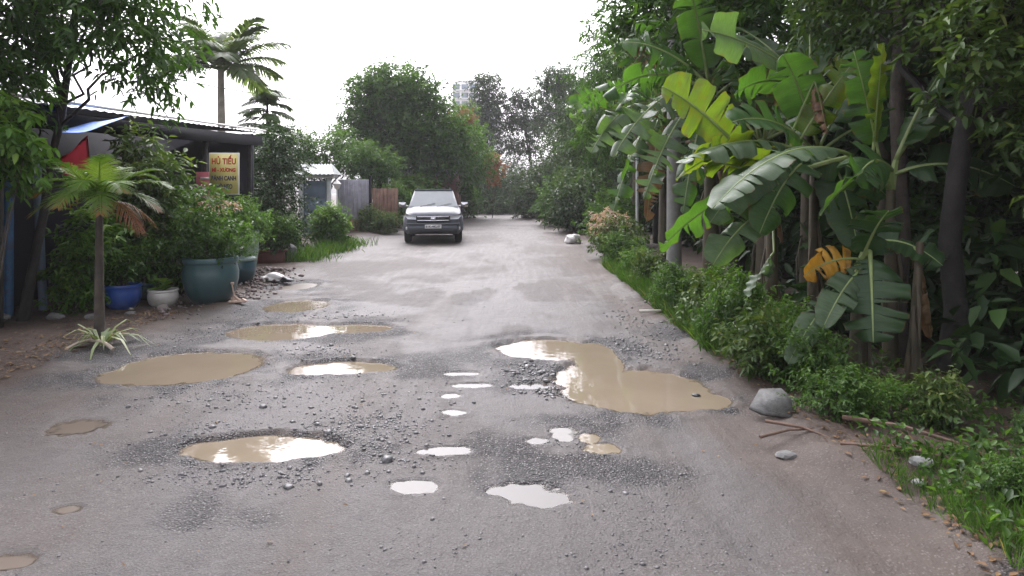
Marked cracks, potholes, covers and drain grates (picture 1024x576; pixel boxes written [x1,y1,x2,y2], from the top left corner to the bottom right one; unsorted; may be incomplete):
pothole [543,424,588,444]
pothole [430,369,490,377]
pothole [517,435,556,447]
pothole [39,502,92,516]
pothole [81,347,282,388]
pothole [0,547,57,572]
pothole [215,320,402,341]
pothole [273,281,323,290]
pothole [410,444,480,457]
pothole [163,427,358,464]
pothole [577,429,629,456]
pothole [442,381,500,389]
